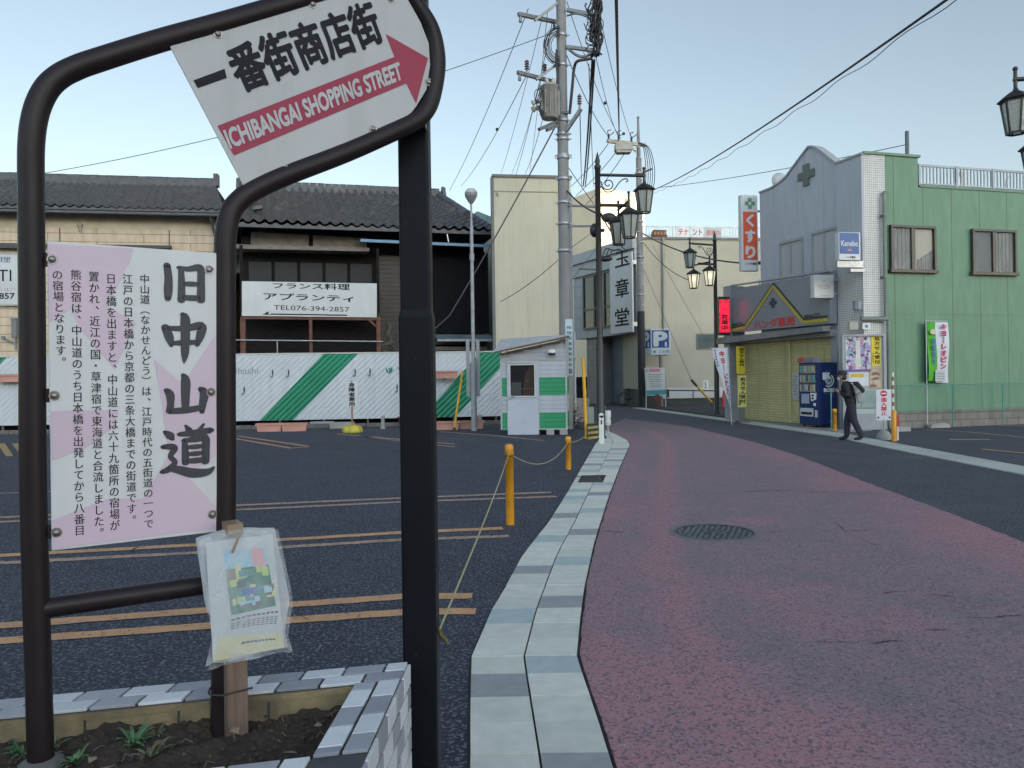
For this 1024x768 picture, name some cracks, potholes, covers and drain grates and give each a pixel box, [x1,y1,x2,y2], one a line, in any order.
manhole cover [668,523,762,542]
crack [833,614,1024,643]
